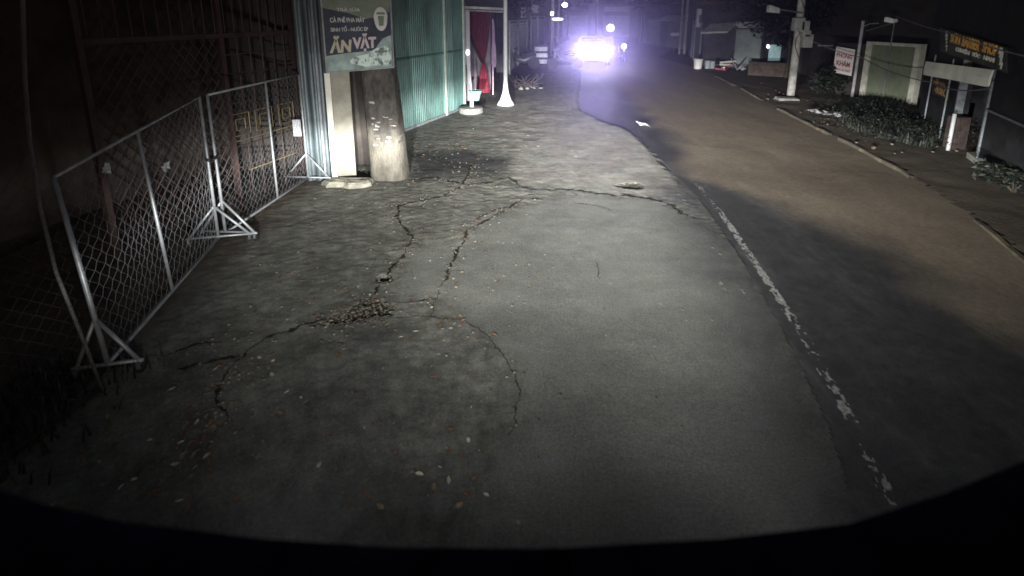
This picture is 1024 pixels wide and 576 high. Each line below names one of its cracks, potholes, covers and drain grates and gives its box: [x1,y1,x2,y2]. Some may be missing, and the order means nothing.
crack [159,163,699,448]
pothole [324,297,396,325]
